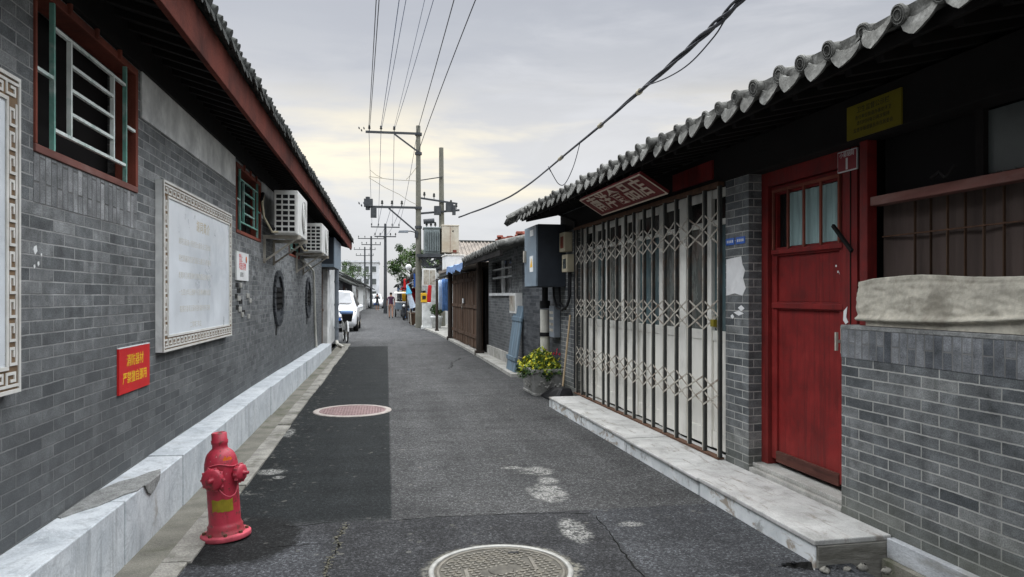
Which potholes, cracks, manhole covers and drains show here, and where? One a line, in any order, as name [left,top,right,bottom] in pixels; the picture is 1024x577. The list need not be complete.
crack [596,516,646,577]
manhole cover [428,544,574,577]
crack [270,522,349,577]
manhole cover [313,404,392,417]
